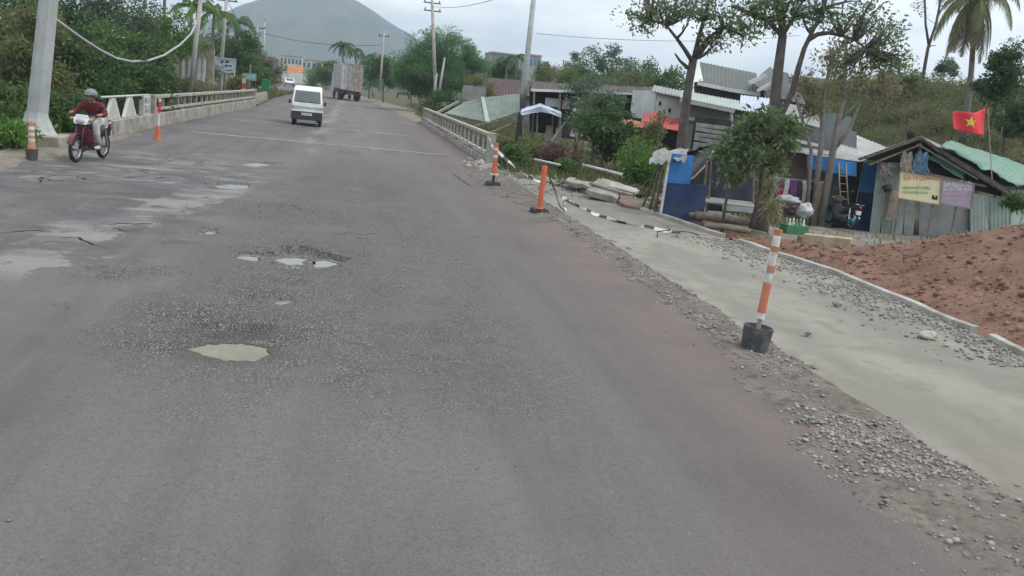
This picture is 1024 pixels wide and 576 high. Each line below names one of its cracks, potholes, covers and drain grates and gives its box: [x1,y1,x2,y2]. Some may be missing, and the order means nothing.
crack [38,175,101,183]
pothole [231,245,351,269]
pothole [188,227,221,236]
pothole [172,181,252,190]
pothole [229,160,284,168]
crack [1,223,151,245]
